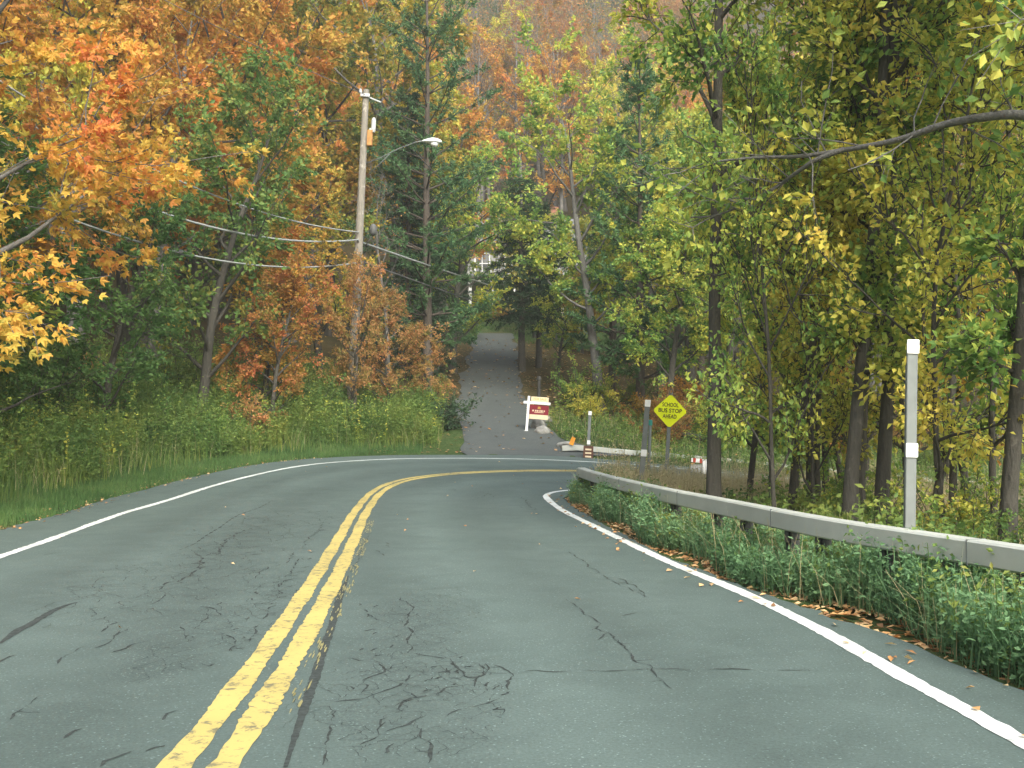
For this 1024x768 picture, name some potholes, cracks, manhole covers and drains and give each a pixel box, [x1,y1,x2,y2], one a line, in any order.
crack [569,552,649,616]
crack [0,500,358,683]
crack [285,589,811,765]
crack [100,745,165,767]
